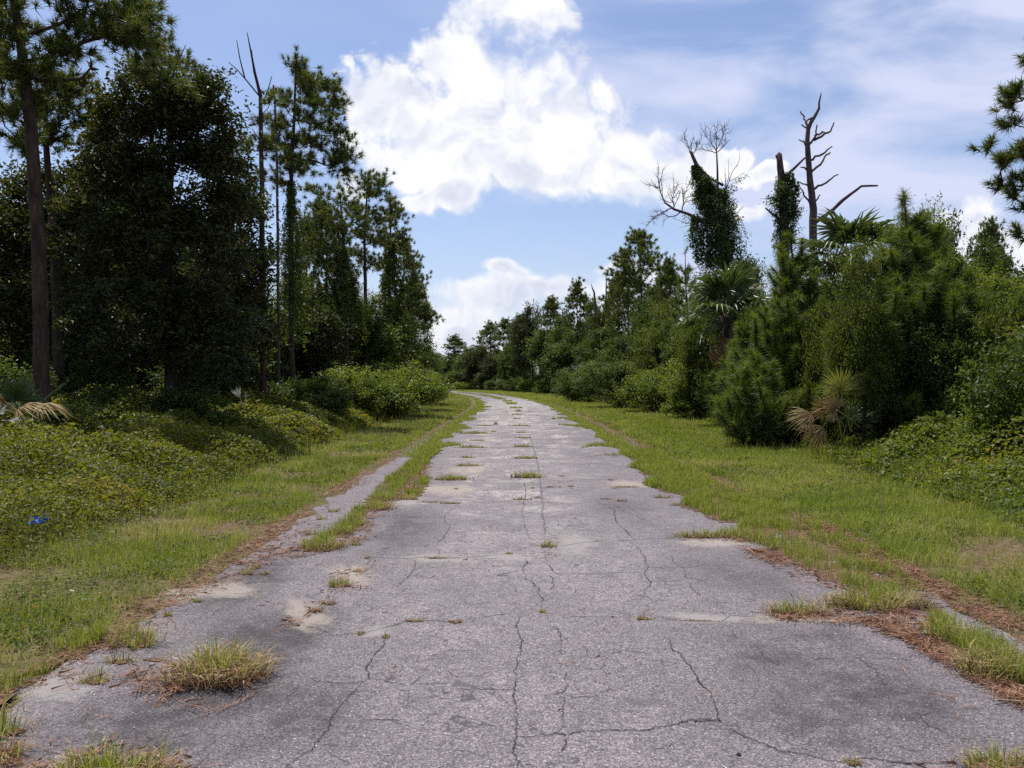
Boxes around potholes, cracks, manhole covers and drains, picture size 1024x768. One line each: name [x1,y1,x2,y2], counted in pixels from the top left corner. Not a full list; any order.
crack [286,613,961,768]
crack [505,503,751,637]
